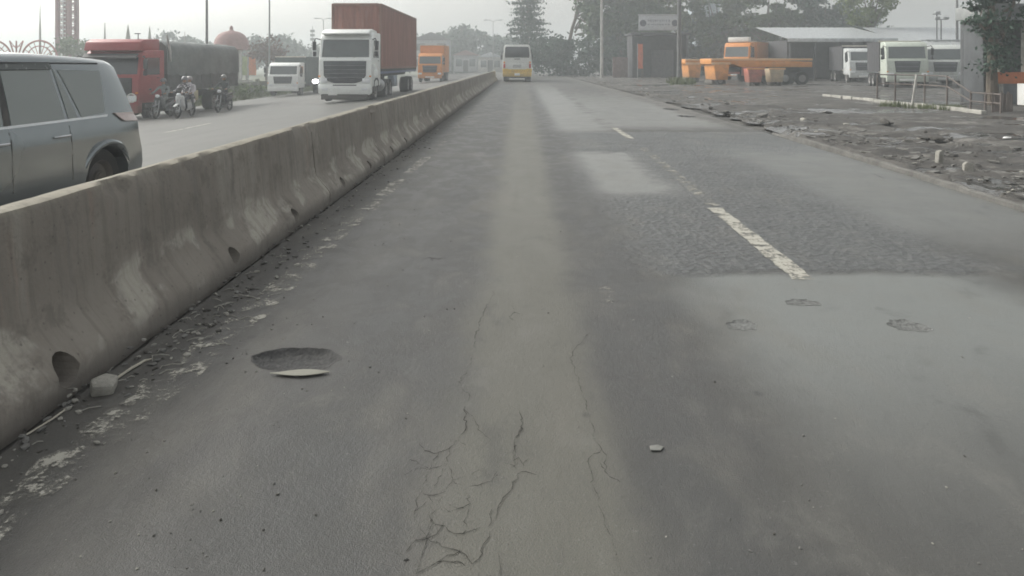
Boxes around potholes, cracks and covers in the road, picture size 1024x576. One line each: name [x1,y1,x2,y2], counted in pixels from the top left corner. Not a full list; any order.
crack [497,413,530,512]
crack [408,309,492,571]
pothole [251,347,342,372]
pothole [726,319,757,330]
pothole [886,319,933,332]
